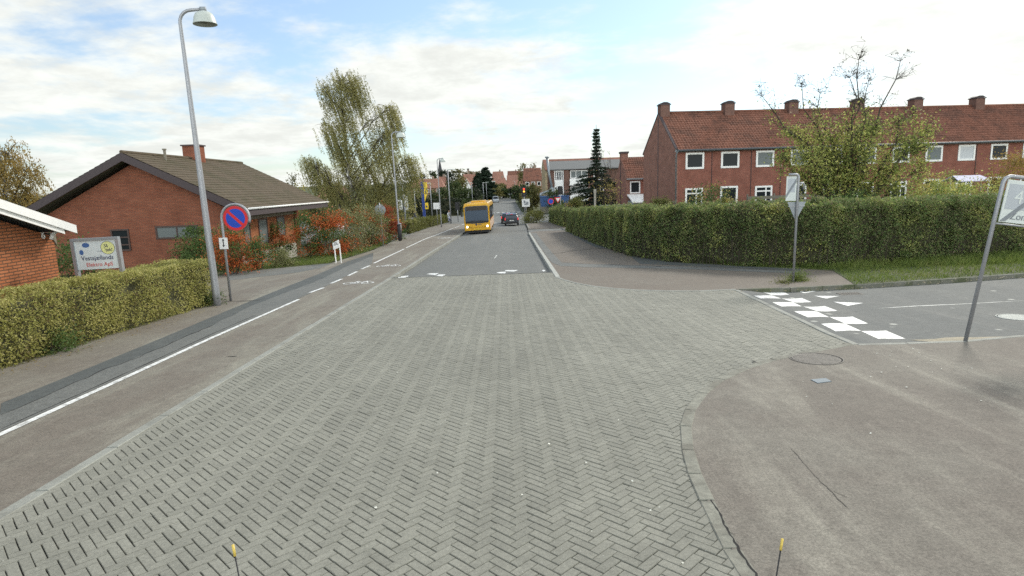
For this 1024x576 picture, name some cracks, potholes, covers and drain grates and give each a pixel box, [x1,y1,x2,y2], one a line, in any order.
manhole cover [789,352,844,365]
